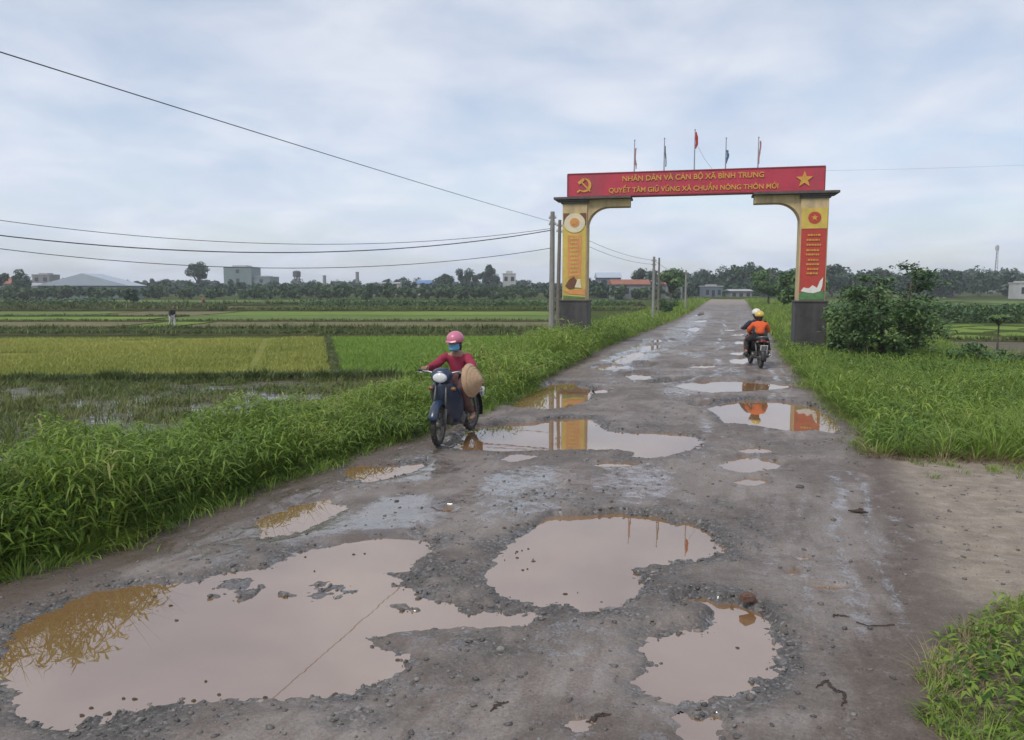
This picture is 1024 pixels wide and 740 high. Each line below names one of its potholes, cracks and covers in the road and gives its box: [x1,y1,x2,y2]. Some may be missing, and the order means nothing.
pothole [663,709,737,740]
pothole [446,414,715,459]
pothole [704,396,846,434]
pothole [479,506,739,617]
pothole [496,451,541,462]
pothole [640,343,663,351]
pothole [509,380,597,409]
pothole [670,376,799,393]
pothole [619,588,807,715]
pothole [708,453,790,474]
pothole [0,531,559,740]
pothole [338,458,432,483]
